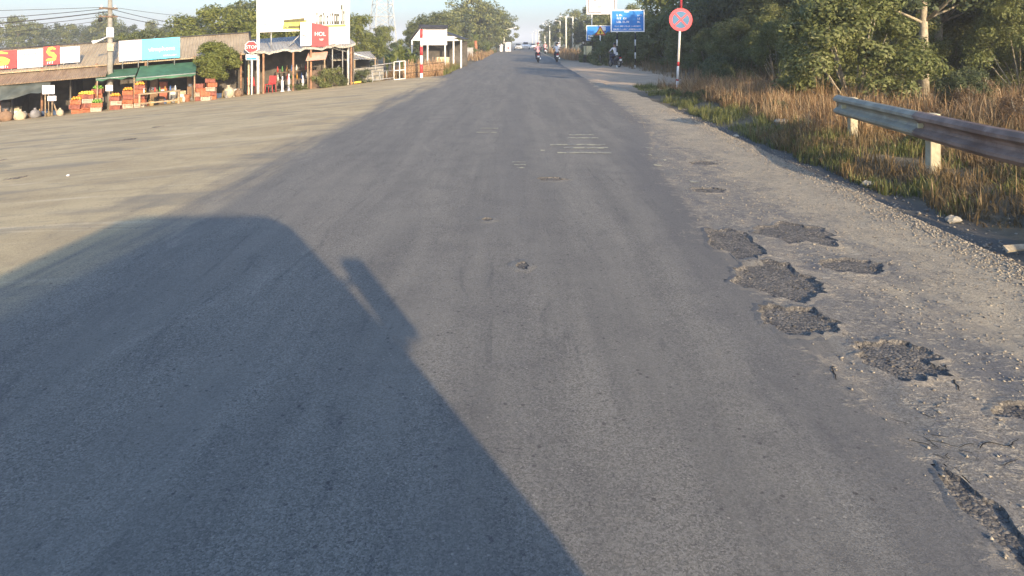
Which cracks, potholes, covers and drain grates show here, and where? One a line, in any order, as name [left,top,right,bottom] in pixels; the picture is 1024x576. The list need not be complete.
pothole [723,257,836,311]
pothole [981,396,1024,425]
pothole [744,220,844,249]
pothole [811,256,891,277]
crack [894,364,1018,465]
pothole [928,460,1024,571]
pothole [700,227,772,267]
pothole [750,301,851,340]
pothole [842,336,964,387]
